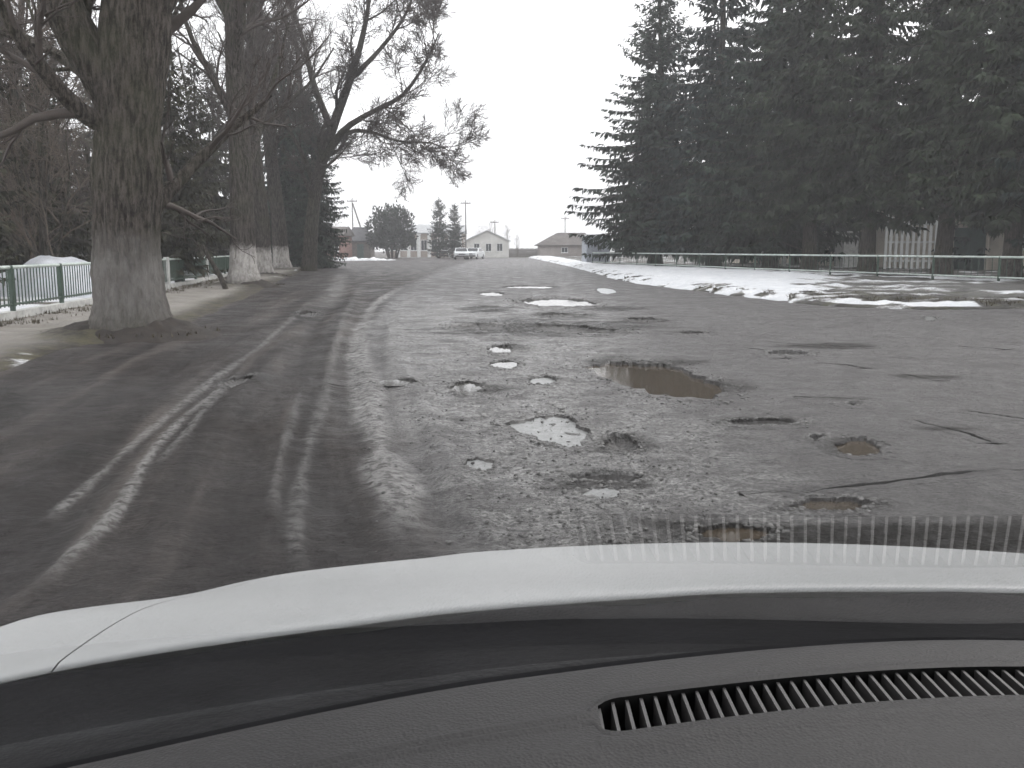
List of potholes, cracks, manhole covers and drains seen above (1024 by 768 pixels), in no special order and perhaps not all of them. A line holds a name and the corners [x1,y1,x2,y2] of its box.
pothole [676,520,792,543]
crack [900,410,1024,444]
pothole [494,411,609,453]
pothole [543,465,665,486]
pothole [710,416,817,430]
crack [737,465,1024,501]
pothole [580,428,656,457]
pothole [571,360,743,404]
pothole [769,494,893,518]
